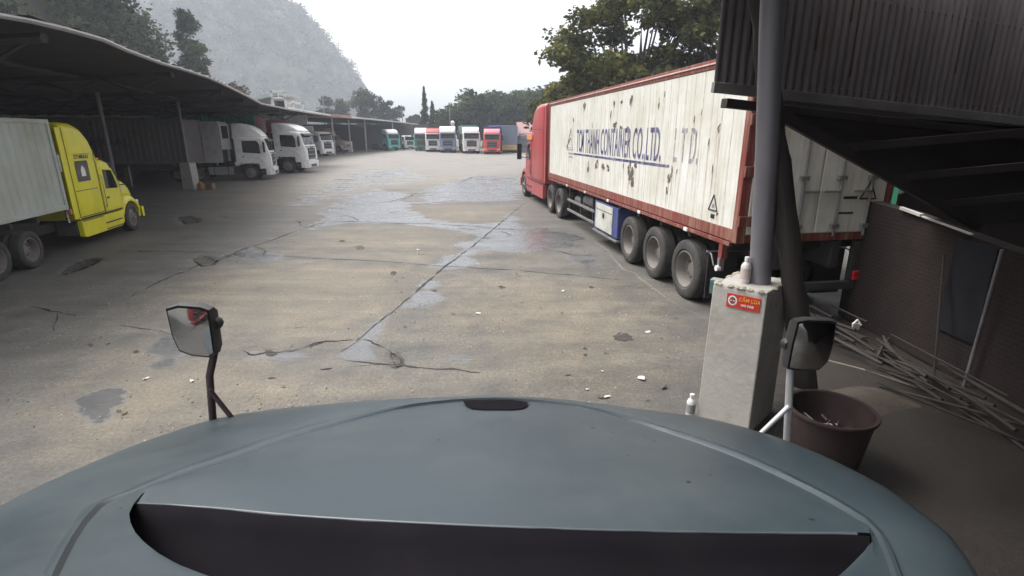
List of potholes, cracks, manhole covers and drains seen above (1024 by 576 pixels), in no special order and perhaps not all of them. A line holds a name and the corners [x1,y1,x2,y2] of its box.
crack [245,327,402,365]
pothole [193,255,217,266]
crack [32,306,76,331]
pothole [62,258,101,274]
